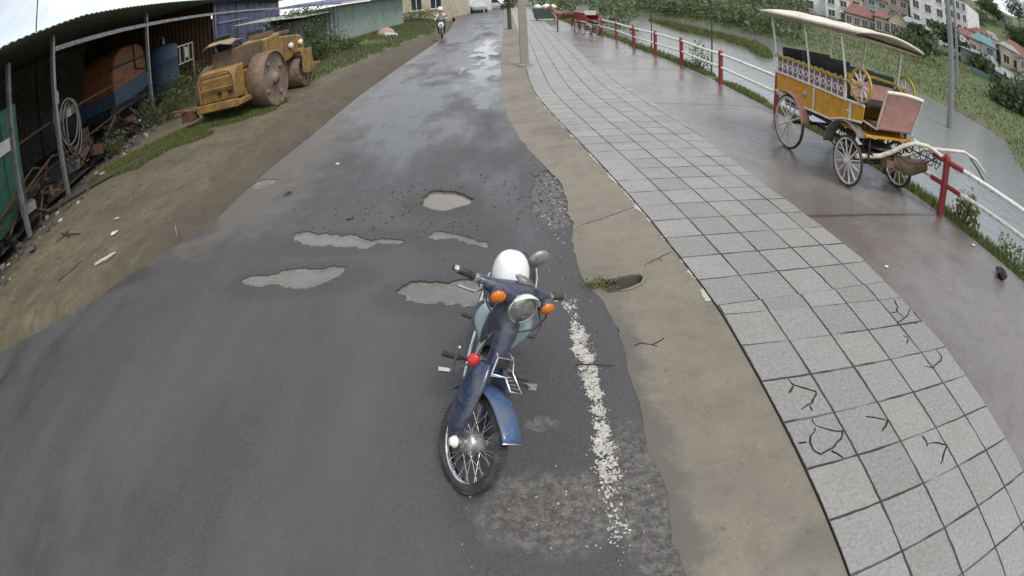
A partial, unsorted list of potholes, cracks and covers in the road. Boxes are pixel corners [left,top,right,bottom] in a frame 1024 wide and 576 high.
pothole [426,231,489,248]
pothole [420,190,474,211]
crack [865,416,889,431]
crack [788,379,843,458]
pothole [293,231,405,249]
crack [922,436,947,464]
crack [891,300,921,344]
pothole [395,278,481,307]
pothole [241,265,346,289]
